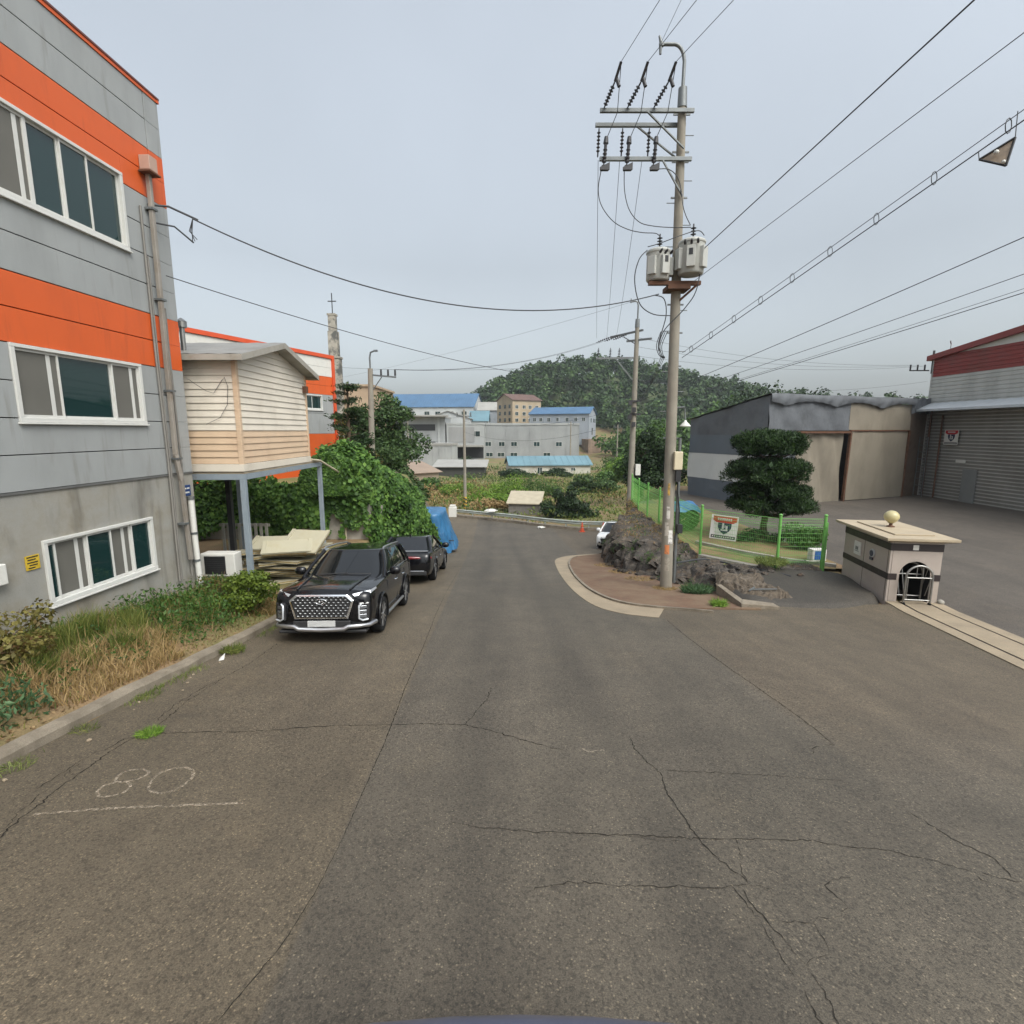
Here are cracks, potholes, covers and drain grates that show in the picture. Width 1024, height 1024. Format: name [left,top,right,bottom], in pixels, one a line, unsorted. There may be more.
crack [452,737,1020,1024]
